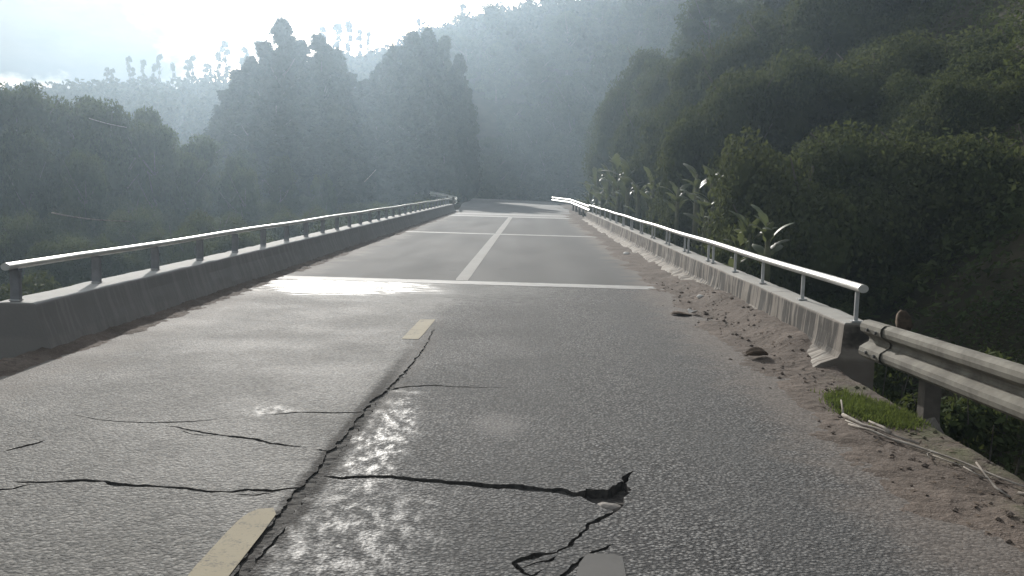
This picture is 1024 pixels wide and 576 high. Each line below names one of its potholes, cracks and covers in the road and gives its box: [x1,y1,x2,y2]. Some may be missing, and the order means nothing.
crack [0,329,614,576]
